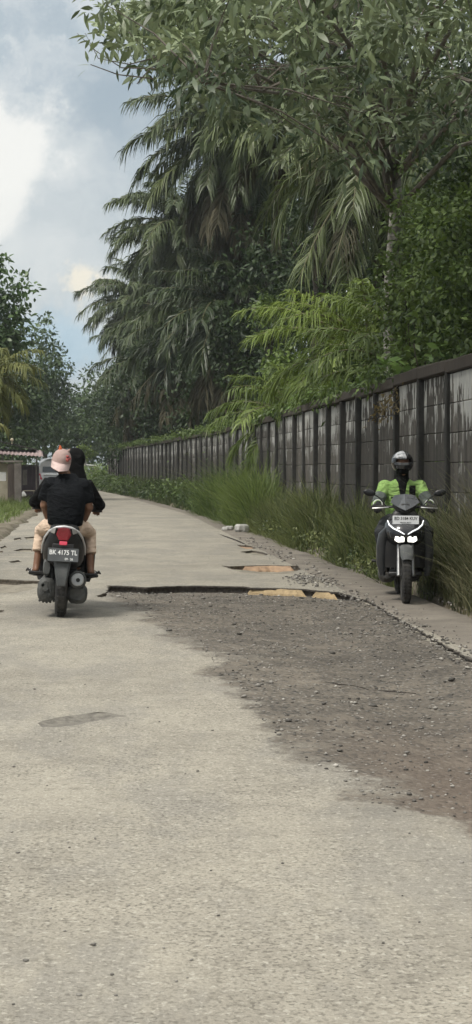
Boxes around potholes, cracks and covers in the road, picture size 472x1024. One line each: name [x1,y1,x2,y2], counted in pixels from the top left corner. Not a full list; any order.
pothole [38,712,125,727]
crack [324,682,416,694]
pothole [224,565,301,574]
pothole [106,585,472,842]
